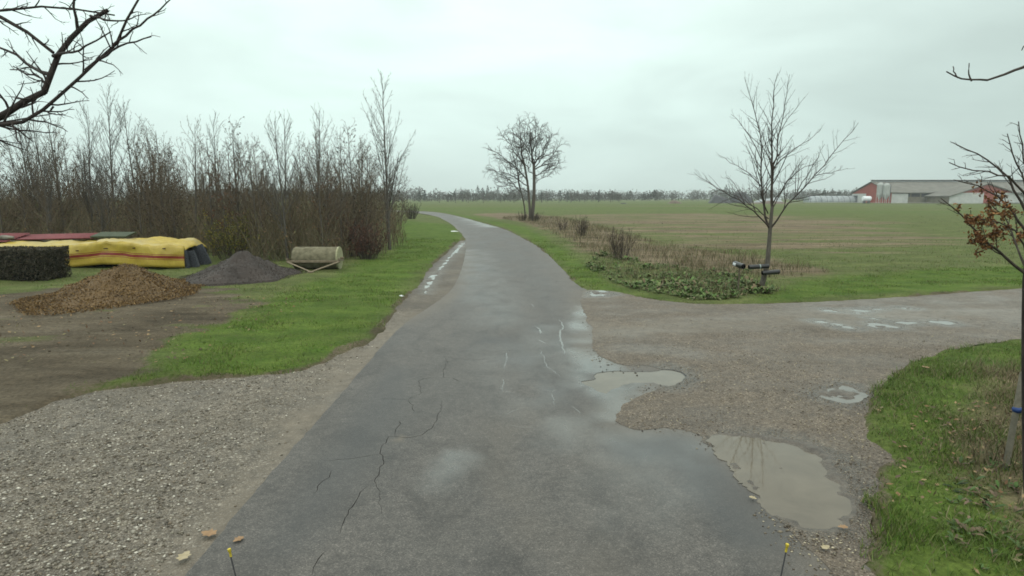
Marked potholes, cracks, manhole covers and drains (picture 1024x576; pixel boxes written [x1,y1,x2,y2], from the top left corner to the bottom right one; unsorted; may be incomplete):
crack [408,304,581,428]
pothole [706,433,857,532]
crack [312,408,441,573]
pothole [818,383,869,403]
